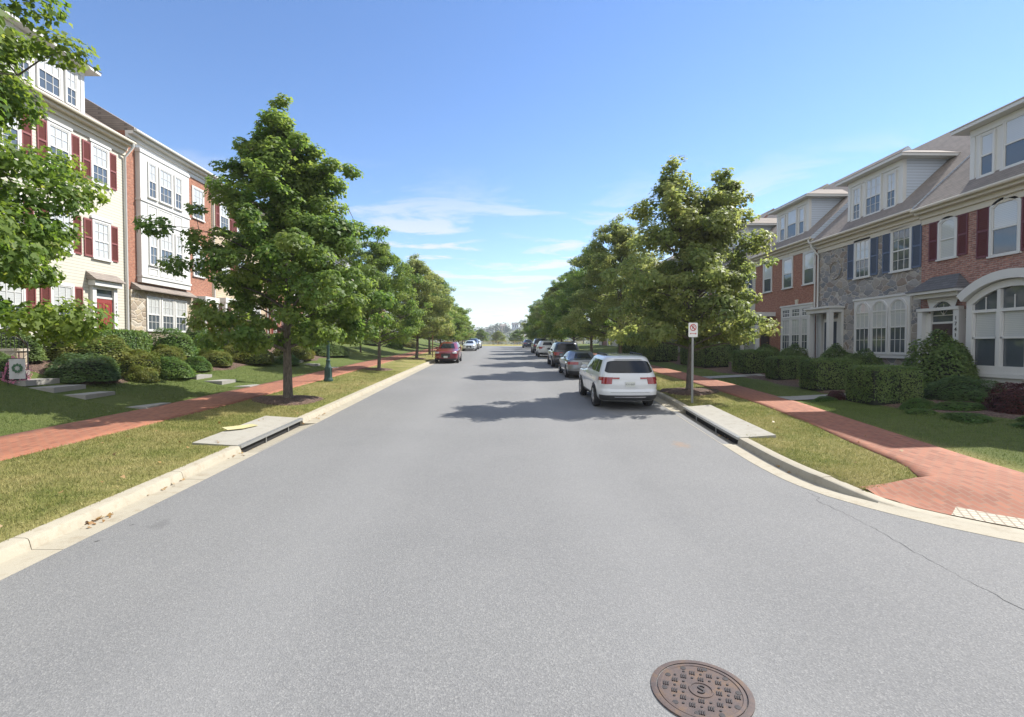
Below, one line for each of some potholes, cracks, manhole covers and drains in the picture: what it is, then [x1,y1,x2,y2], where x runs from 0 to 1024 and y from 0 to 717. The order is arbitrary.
crack [816,497,1022,609]
manhole cover [651,660,755,717]
drain grate [673,405,776,444]
drain grate [192,416,316,452]
